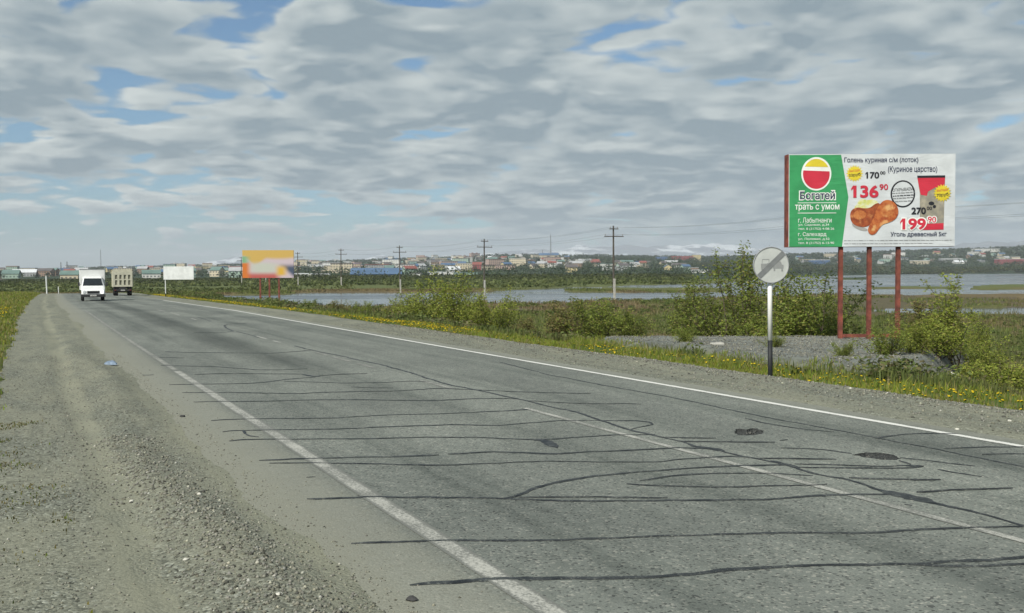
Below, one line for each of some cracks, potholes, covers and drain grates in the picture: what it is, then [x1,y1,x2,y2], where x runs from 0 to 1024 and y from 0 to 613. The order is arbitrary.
pothole [855,452,900,460]
